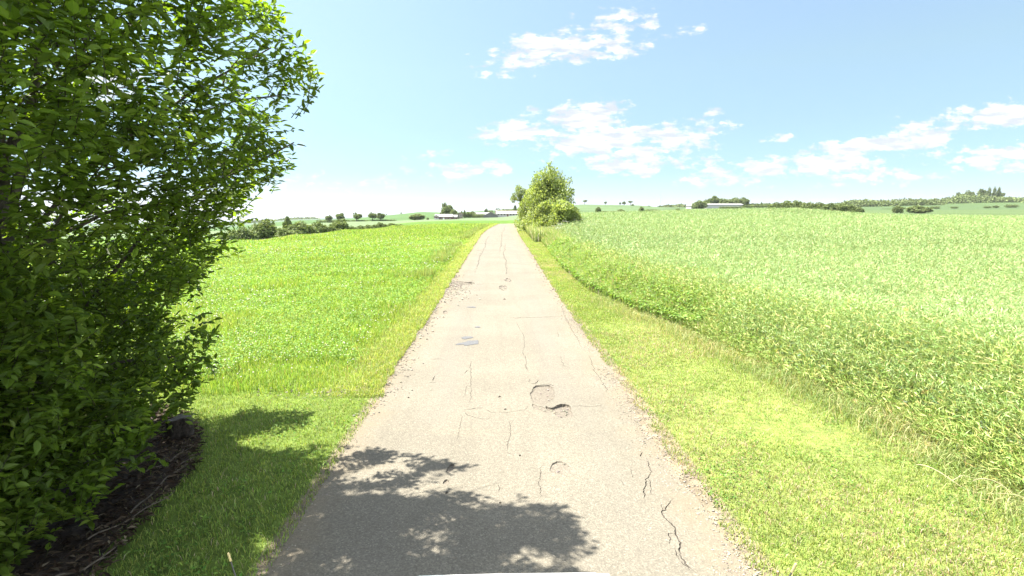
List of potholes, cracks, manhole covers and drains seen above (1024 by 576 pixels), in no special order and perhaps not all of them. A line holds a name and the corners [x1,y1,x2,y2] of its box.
pothole [545,404,573,418]
crack [511,303,607,407]
crack [622,453,690,570]
pothole [530,385,555,405]
crack [458,367,520,454]
pothole [549,461,572,474]
